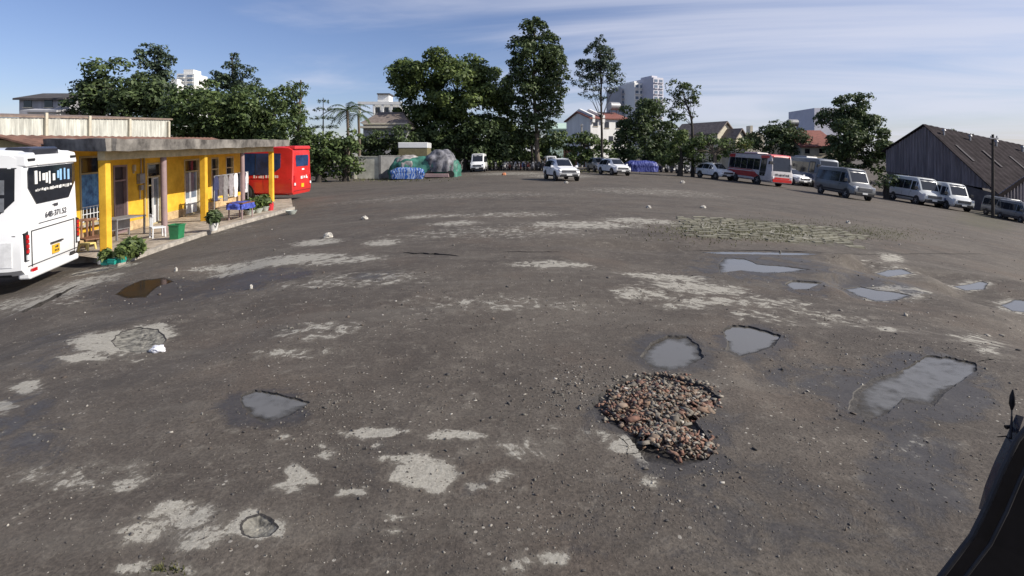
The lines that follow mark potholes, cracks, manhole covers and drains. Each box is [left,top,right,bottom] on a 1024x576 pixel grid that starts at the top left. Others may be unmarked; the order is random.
pothole [589,374,720,467]
pothole [111,327,167,353]
pothole [848,355,977,421]
pothole [640,335,704,370]
pothole [240,513,279,538]
pothole [240,390,310,423]
pothole [723,325,781,357]
